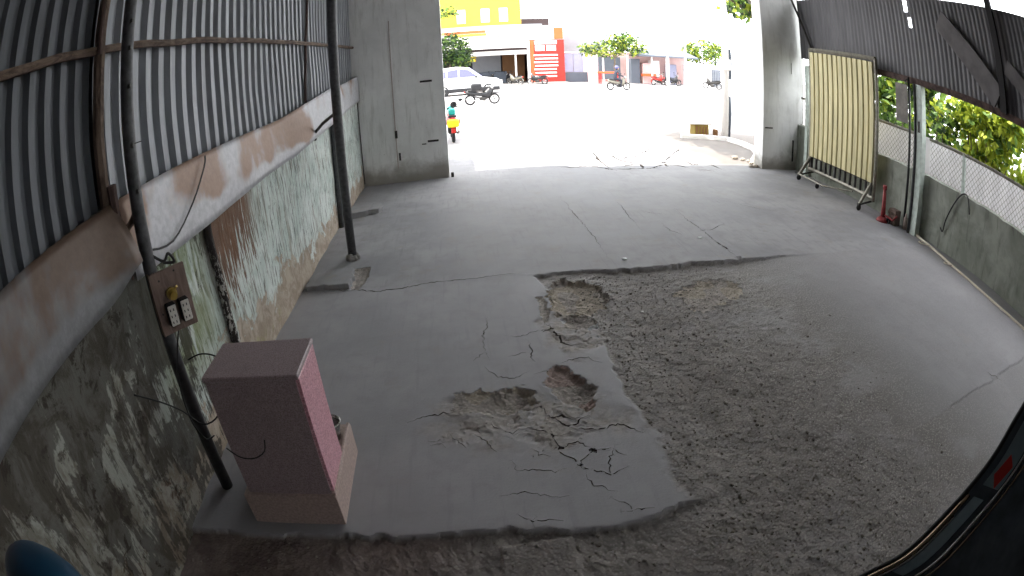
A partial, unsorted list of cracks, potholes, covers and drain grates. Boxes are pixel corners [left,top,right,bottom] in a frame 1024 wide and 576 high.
crack [555,196,771,259]
pothole [557,314,602,333]
crack [405,402,656,530]
crack [980,365,1008,385]
pothole [537,362,602,415]
pothole [440,383,545,419]
pothole [670,277,745,315]
crack [547,149,730,172]
pothole [530,295,555,324]
crack [469,316,605,382]
pothole [541,277,614,320]
